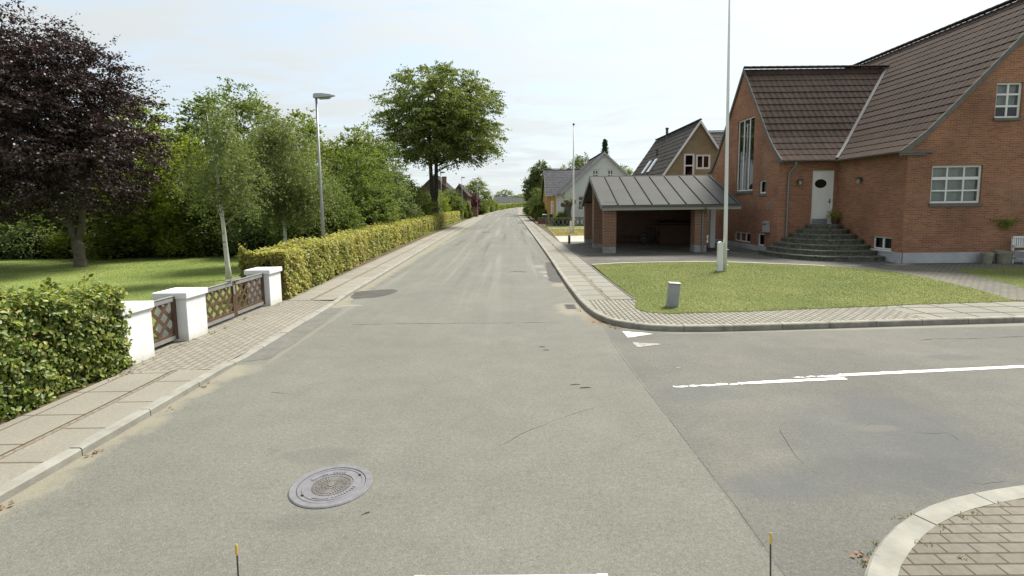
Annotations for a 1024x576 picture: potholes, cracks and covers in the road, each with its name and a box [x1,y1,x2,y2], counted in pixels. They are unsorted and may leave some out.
manhole cover [288,465,373,509]
